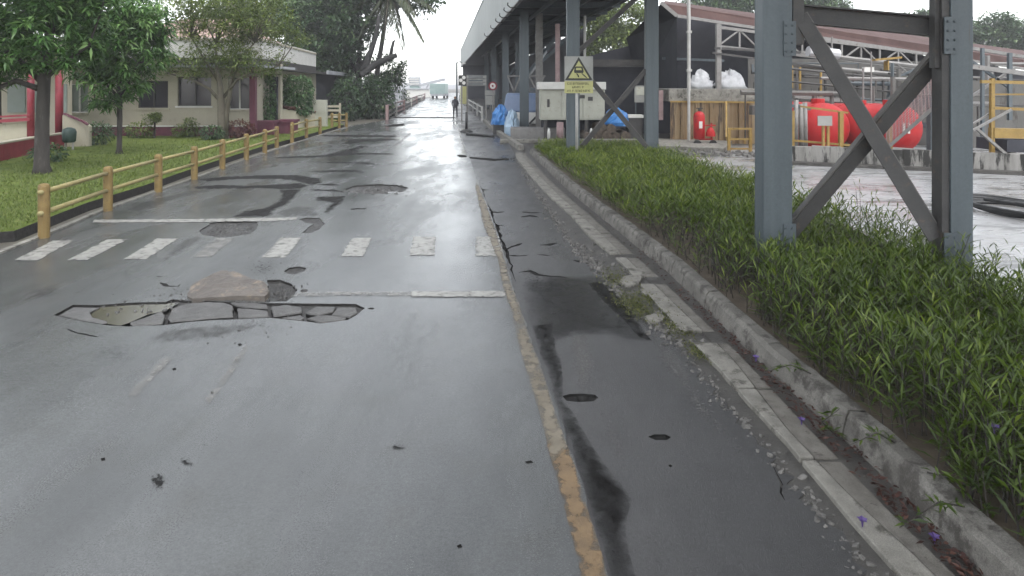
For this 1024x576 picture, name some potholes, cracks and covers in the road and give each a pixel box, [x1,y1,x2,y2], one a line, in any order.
pothole [563,394,598,402]
pothole [299,218,324,233]
pothole [267,280,297,302]
crack [481,188,589,281]
pothole [284,266,306,274]
pothole [199,221,258,237]
pothole [55,299,364,327]
pothole [346,184,408,193]
